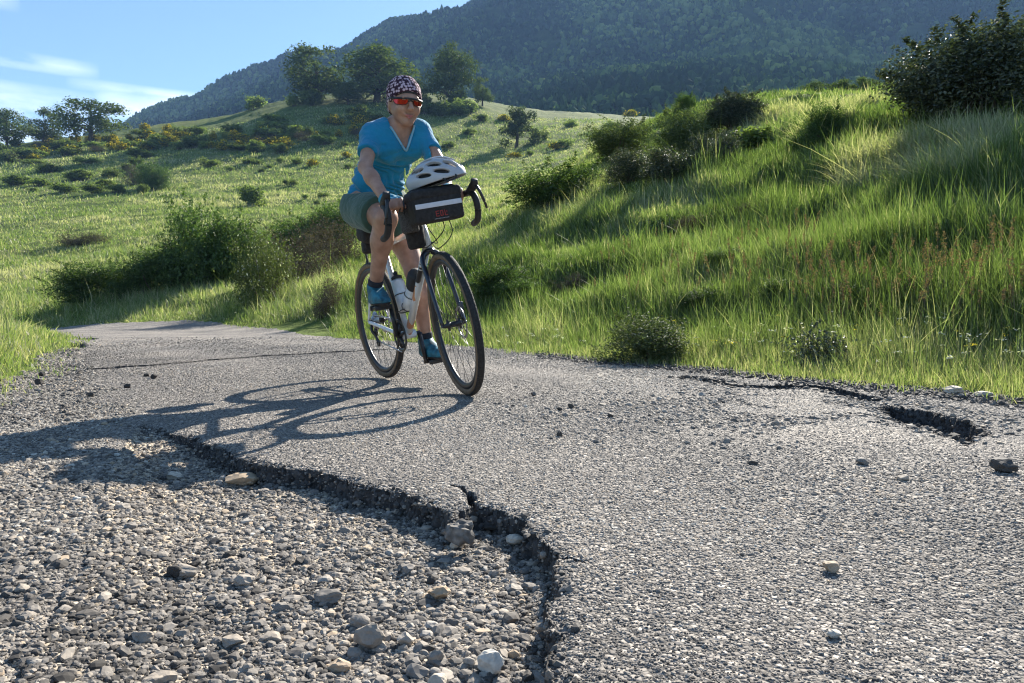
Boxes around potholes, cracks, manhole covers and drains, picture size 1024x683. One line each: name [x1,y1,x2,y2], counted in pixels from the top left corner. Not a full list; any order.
pothole [12,427,566,683]
crack [70,349,394,371]
pothole [880,405,993,446]
crack [686,377,878,402]
